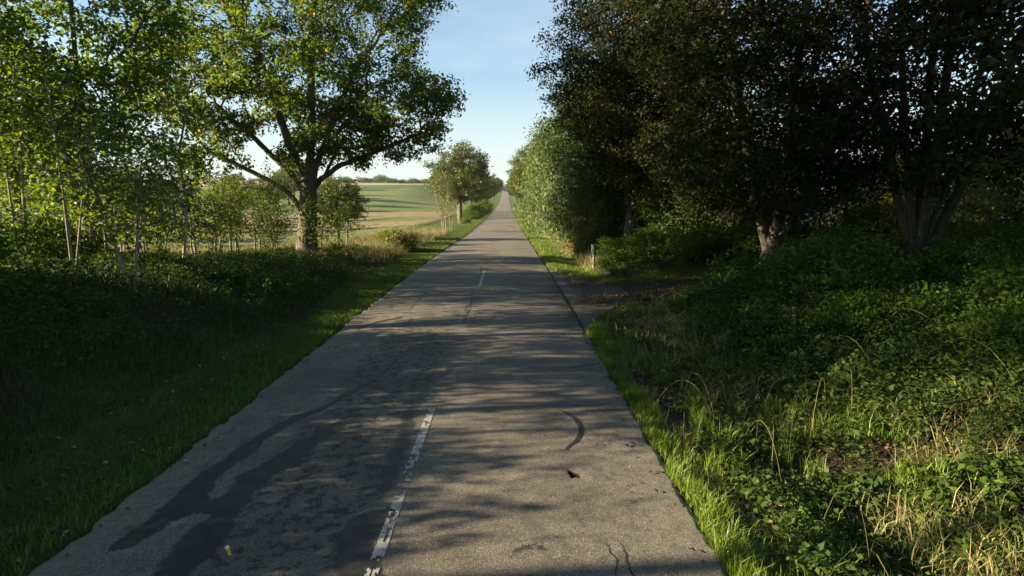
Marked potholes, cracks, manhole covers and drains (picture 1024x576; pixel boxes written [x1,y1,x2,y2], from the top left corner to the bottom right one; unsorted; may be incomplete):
crack [604,540,635,576]
